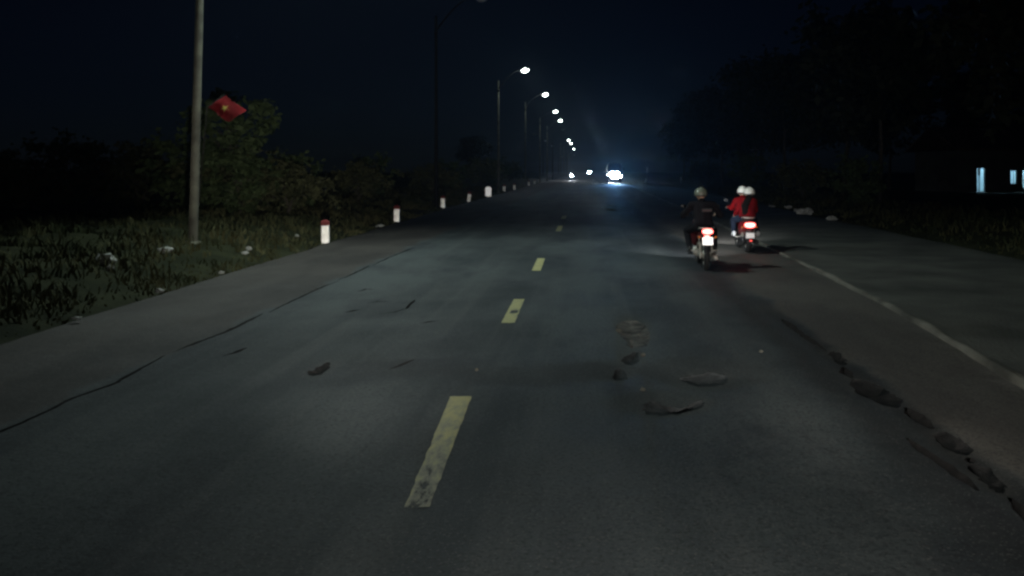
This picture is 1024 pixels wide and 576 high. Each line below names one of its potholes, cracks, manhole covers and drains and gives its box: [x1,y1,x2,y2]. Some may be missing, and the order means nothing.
pothole [967,464,1008,493]
pothole [680,372,729,387]
crack [0,247,433,433]
pothole [612,369,628,381]
pothole [849,379,903,408]
pothole [642,400,705,416]
pothole [931,432,974,456]
pothole [828,351,848,366]
pothole [616,320,650,348]
pothole [621,352,640,365]
pothole [307,362,330,376]
